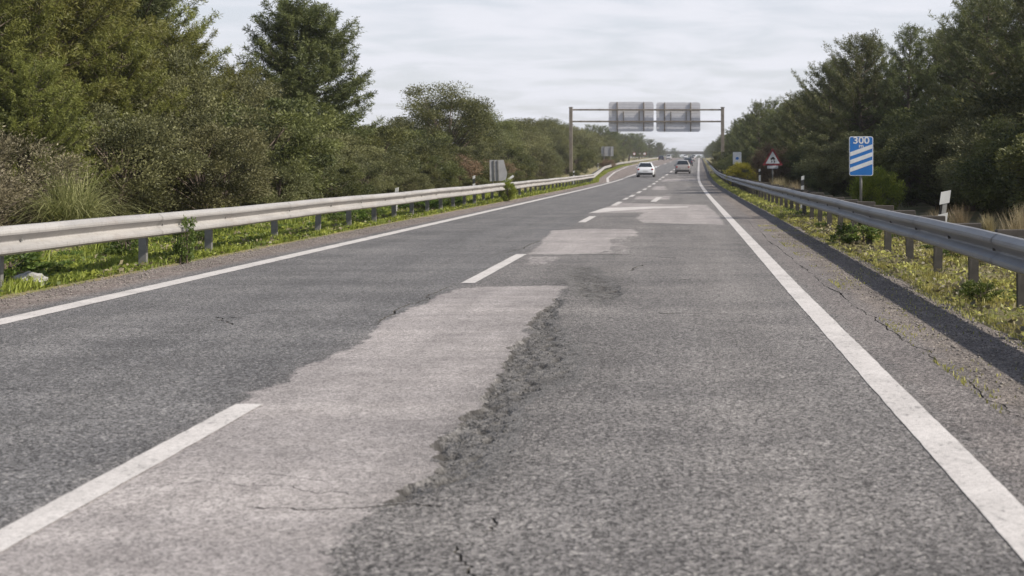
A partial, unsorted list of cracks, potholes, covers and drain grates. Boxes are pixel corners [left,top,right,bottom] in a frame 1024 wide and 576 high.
crack [152,472,444,511]
crack [747,220,1022,418]
crack [436,516,499,576]
crack [375,286,451,326]
